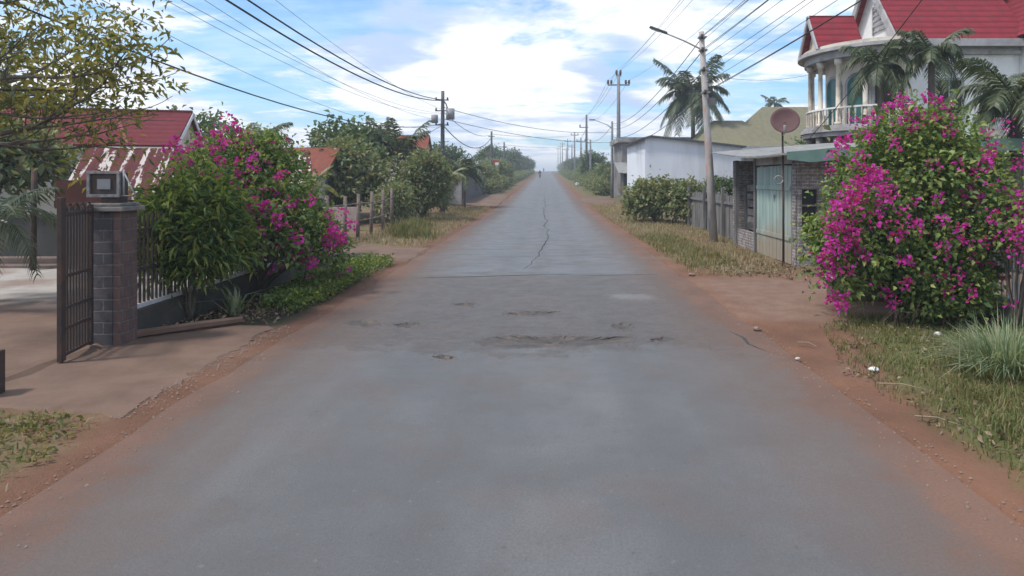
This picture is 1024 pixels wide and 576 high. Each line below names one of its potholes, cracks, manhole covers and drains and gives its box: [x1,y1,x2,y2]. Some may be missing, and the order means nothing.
pothole [347,320,380,328]
crack [730,331,767,352]
pothole [475,335,634,349]
crack [429,196,608,278]
